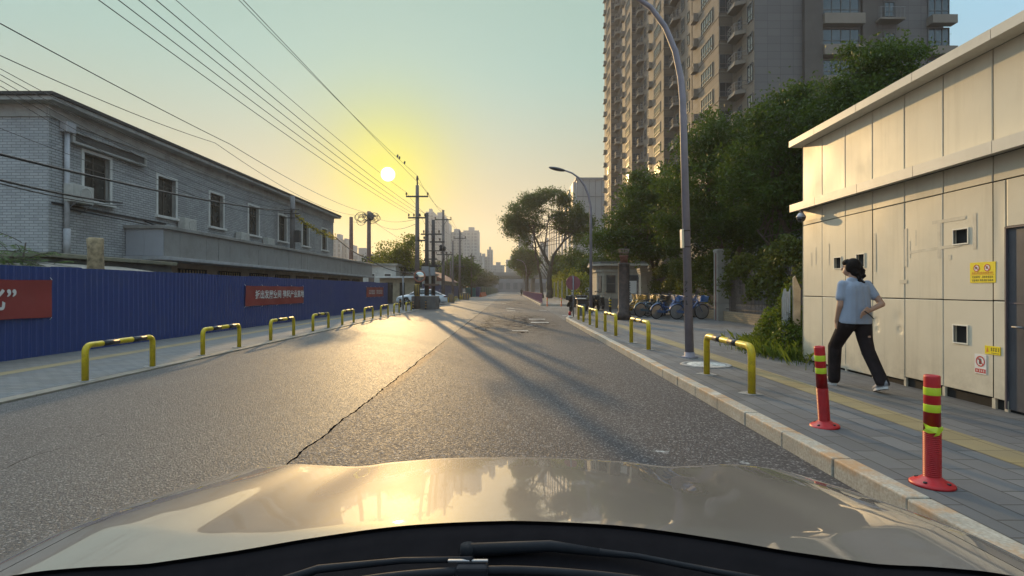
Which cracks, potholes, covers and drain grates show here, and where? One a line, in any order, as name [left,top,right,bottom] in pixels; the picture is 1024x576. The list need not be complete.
crack [285,301,556,465]
